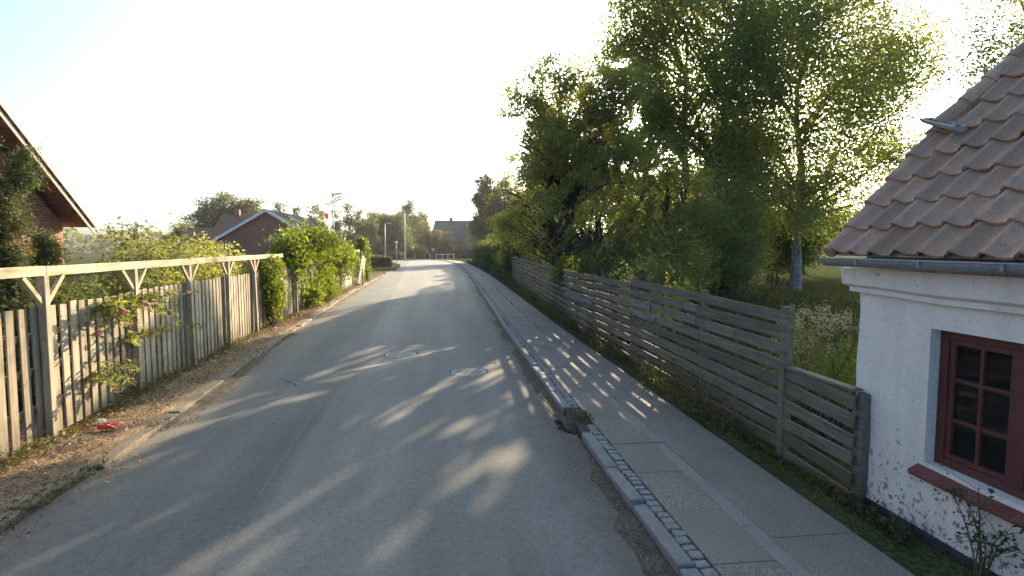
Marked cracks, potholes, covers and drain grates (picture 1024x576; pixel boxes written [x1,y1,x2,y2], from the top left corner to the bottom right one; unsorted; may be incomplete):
pothole [554,417,577,436]
manhole cover [450,368,488,376]
